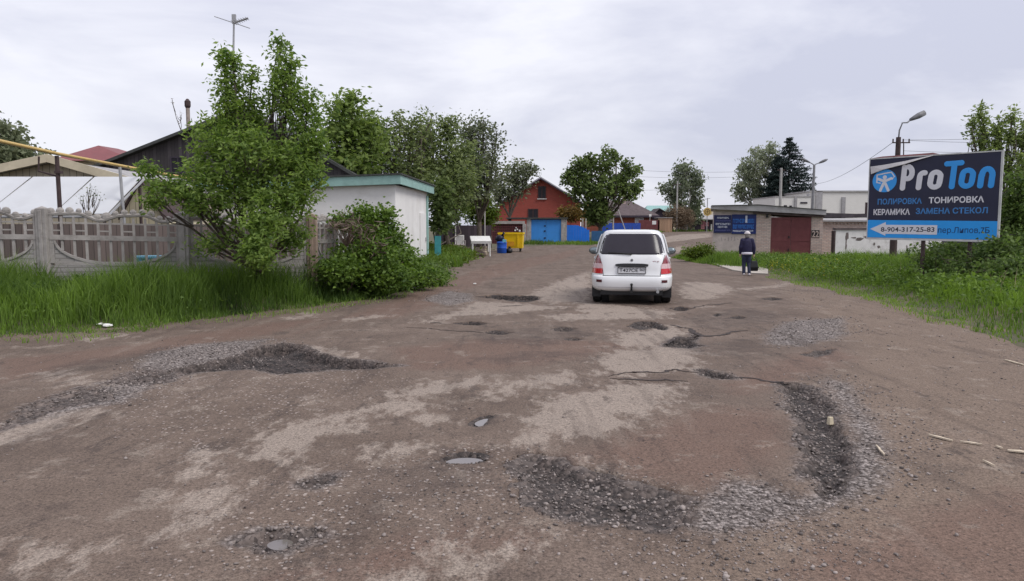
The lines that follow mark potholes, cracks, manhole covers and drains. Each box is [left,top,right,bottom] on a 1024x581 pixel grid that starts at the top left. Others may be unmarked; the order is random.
pothole [103,369,186,386]
pothole [627,322,668,330]
pothole [468,415,494,427]
pothole [138,343,402,383]
pothole [434,451,490,464]
crack [663,303,746,345]
pothole [297,476,338,489]
pothole [664,334,700,349]
pothole [0,387,114,430]
pothole [696,369,733,379]
crack [610,369,698,381]
pothole [801,349,834,357]
